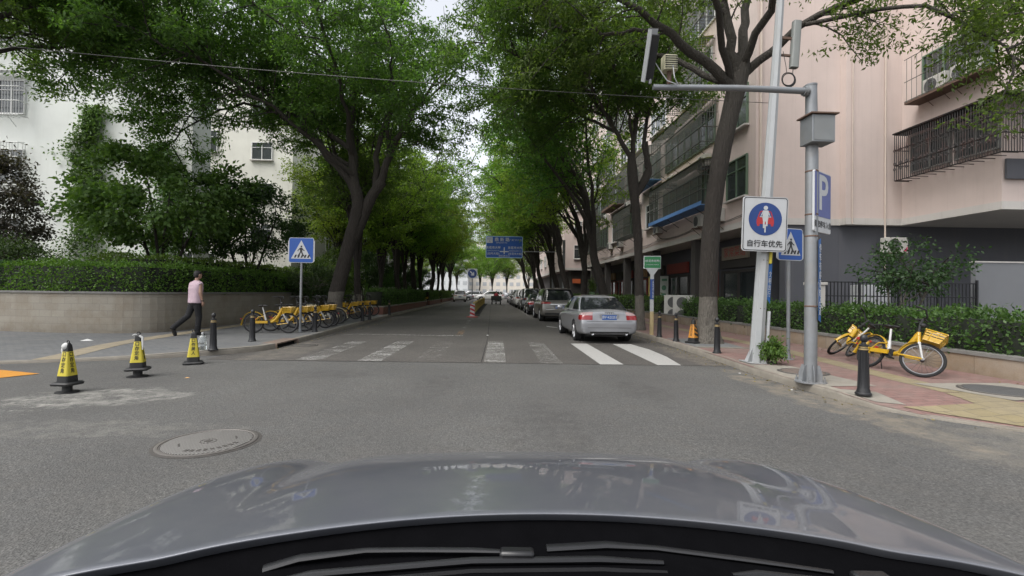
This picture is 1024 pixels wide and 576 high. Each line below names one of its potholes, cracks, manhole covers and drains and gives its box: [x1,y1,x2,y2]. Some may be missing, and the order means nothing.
manhole cover [956,384,1024,398]
manhole cover [149,429,262,459]
manhole cover [777,368,831,376]
drain grate [264,338,299,348]
